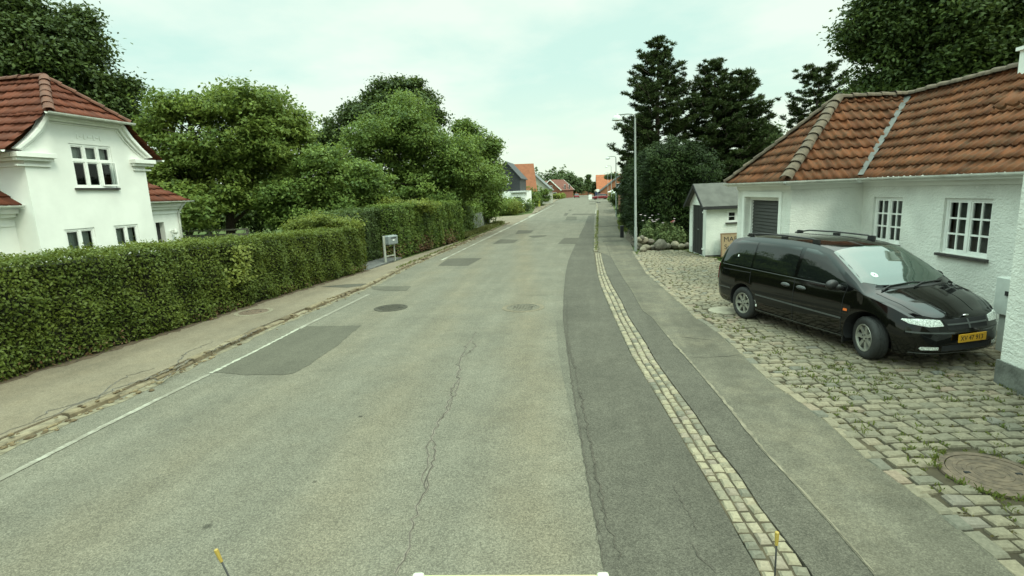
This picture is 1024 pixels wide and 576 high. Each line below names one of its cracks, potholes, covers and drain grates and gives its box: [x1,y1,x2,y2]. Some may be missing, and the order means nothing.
crack [394,332,477,574]
manhole cover [708,306,737,315]
manhole cover [936,452,1024,500]
manhole cover [502,303,544,312]
manhole cover [233,308,274,316]
crack [2,324,266,434]
manhole cover [374,304,408,312]
